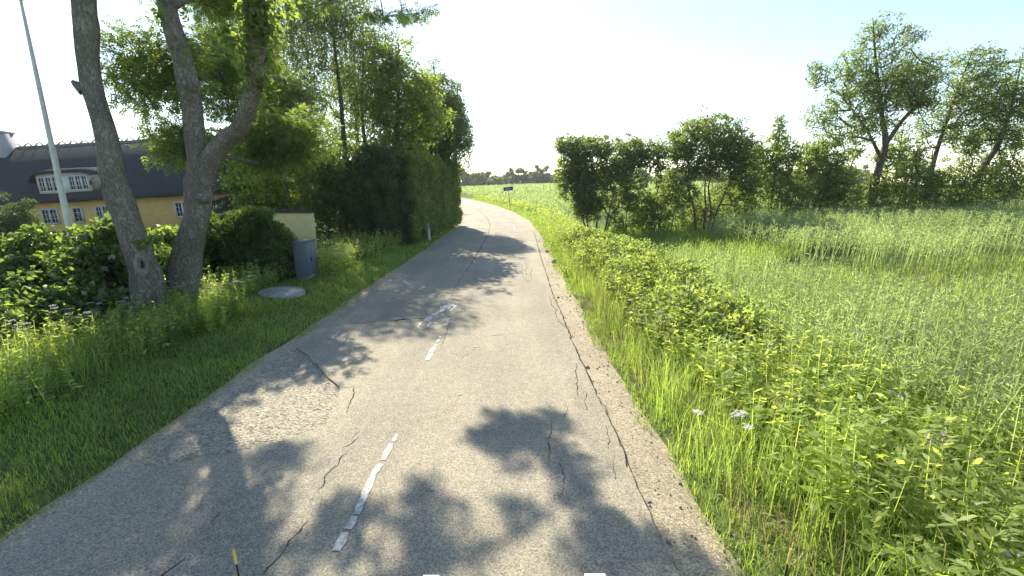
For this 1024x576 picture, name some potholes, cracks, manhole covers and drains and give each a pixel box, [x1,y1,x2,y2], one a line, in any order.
crack [522,234,678,570]
manhole cover [257,286,305,299]
crack [264,386,357,574]
